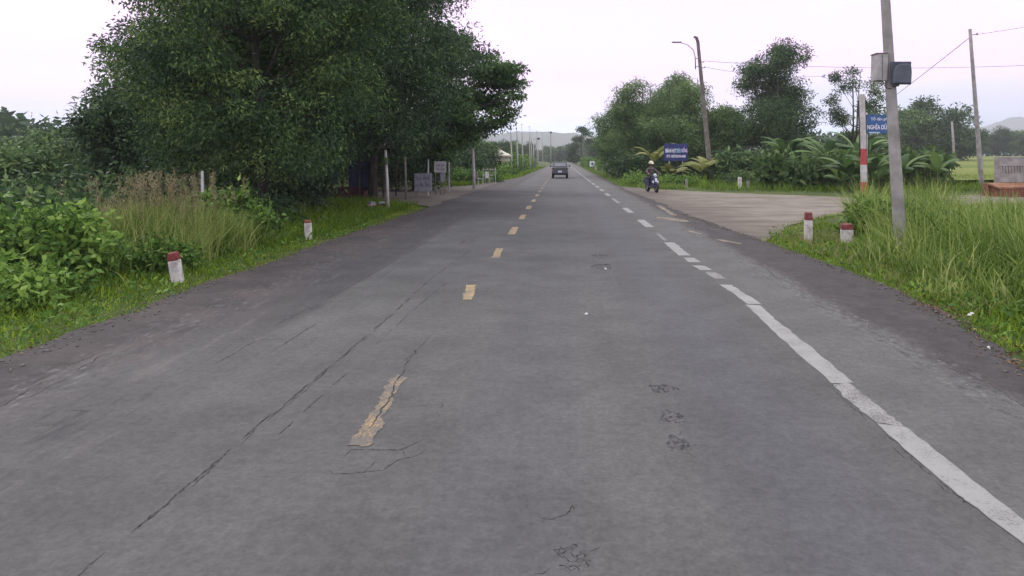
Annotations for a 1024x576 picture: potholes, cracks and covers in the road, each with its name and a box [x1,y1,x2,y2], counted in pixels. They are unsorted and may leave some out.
pothole [659,410,688,426]
crack [0,333,155,407]
crack [77,251,470,576]
pothole [667,434,692,452]
crack [535,544,598,574]
pothole [648,385,679,395]
